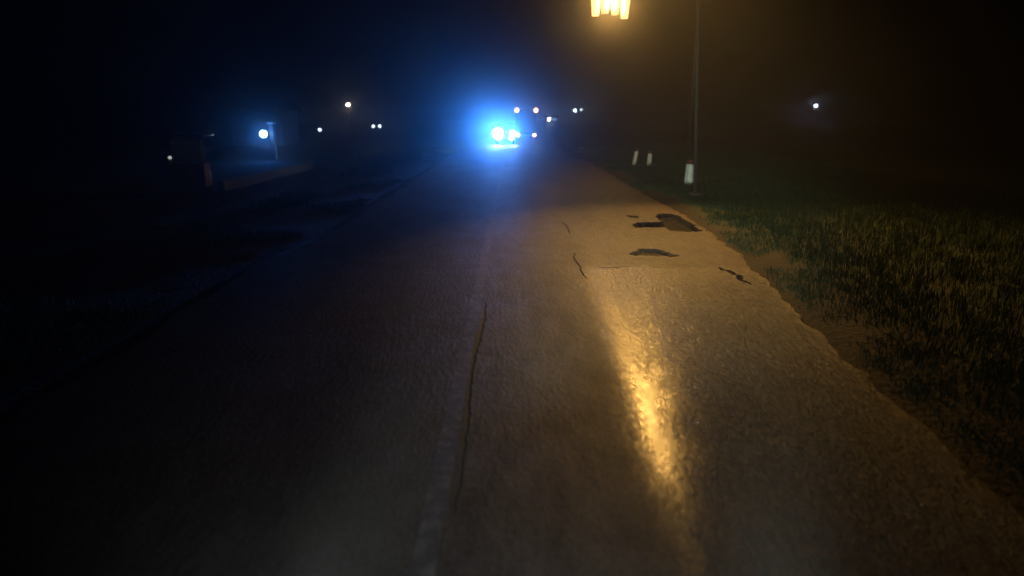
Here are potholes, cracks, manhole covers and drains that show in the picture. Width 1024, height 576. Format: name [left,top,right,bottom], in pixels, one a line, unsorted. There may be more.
pothole [632,214,702,232]
crack [719,267,752,285]
pothole [629,249,679,257]
